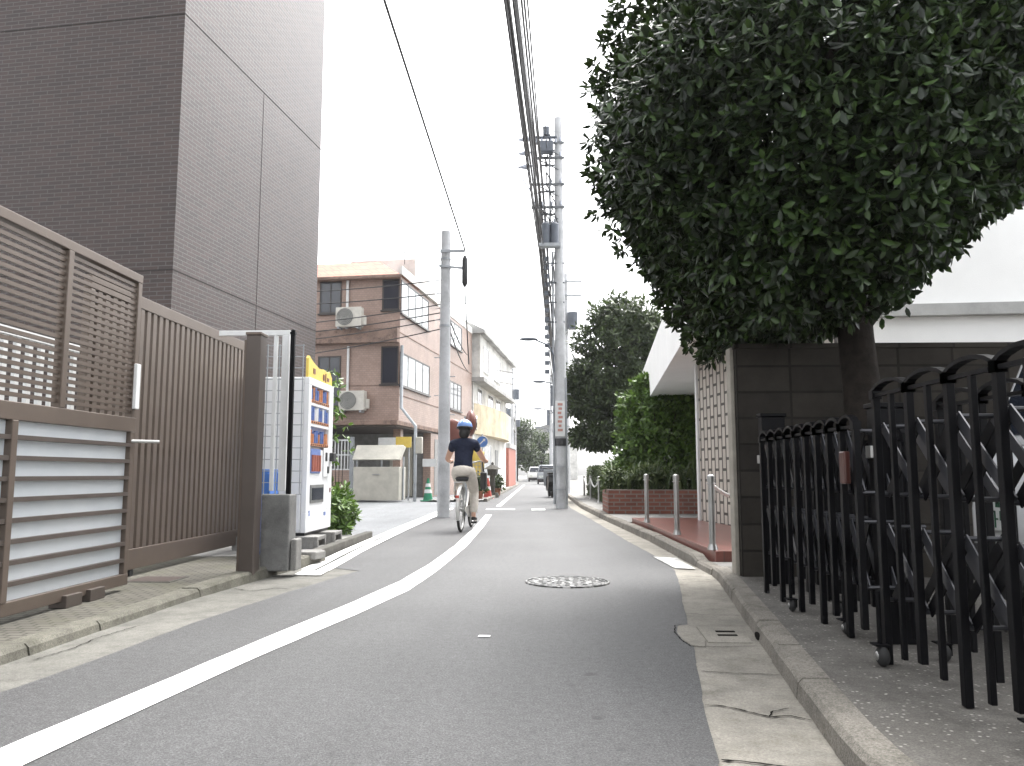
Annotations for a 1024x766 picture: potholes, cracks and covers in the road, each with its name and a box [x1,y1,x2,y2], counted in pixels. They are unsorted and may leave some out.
manhole cover [525,576,610,588]
crack [705,704,811,720]
